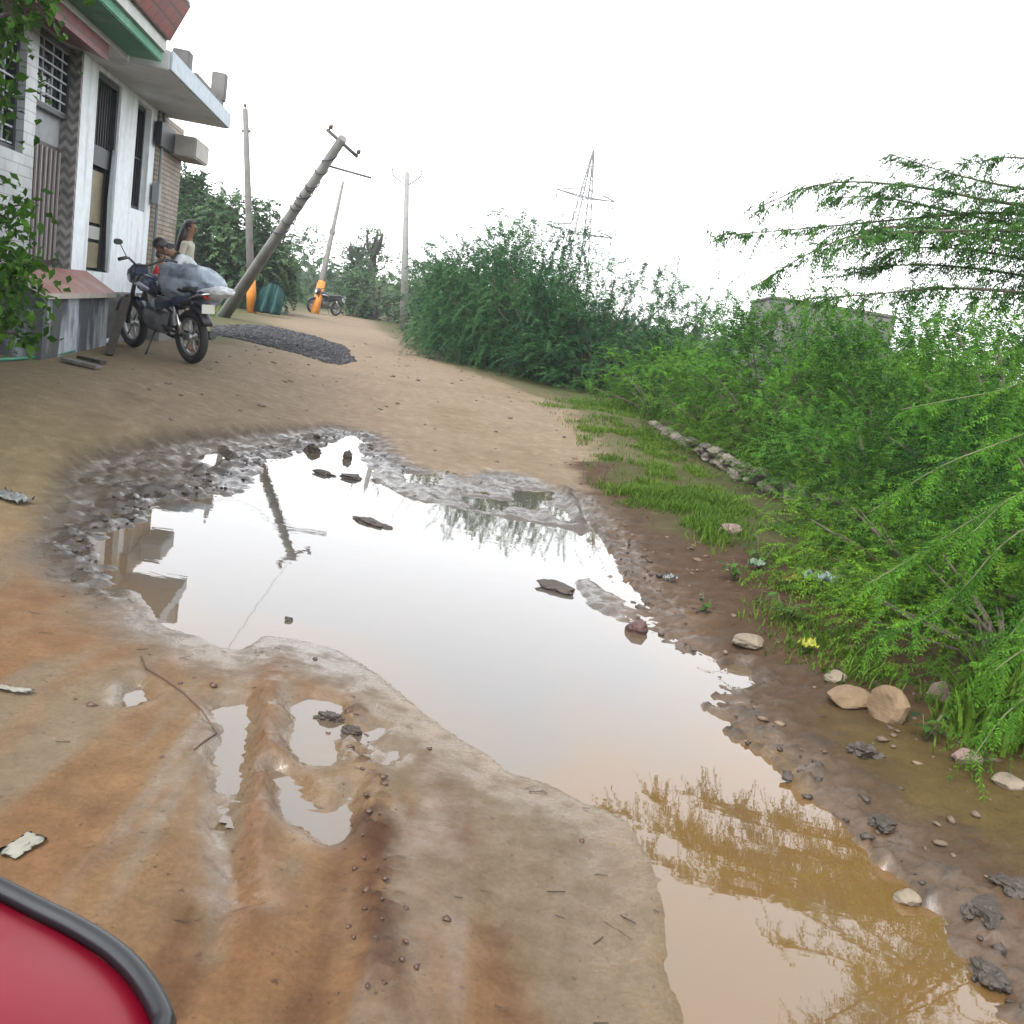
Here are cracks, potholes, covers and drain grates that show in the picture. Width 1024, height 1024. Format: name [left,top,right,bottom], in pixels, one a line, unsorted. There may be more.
pothole [46,430,1024,1024]
